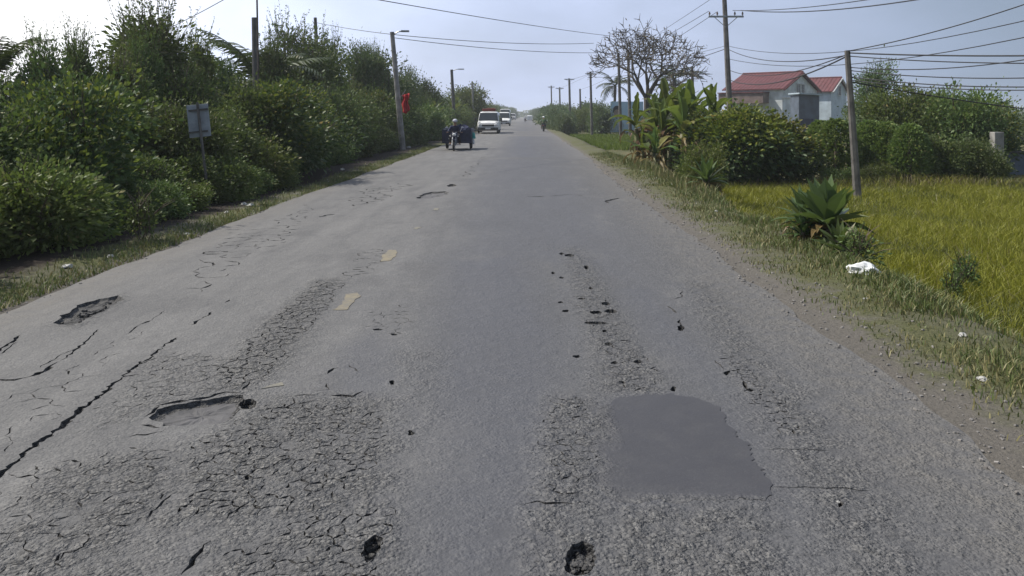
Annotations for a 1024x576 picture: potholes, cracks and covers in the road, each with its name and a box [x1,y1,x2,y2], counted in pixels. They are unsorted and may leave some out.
pothole [362,535,383,563]
pothole [416,191,449,200]
crack [0,183,413,576]
pothole [149,395,245,426]
pothole [238,399,257,409]
pothole [54,295,125,325]
pothole [564,541,597,576]
crack [522,397,597,505]
